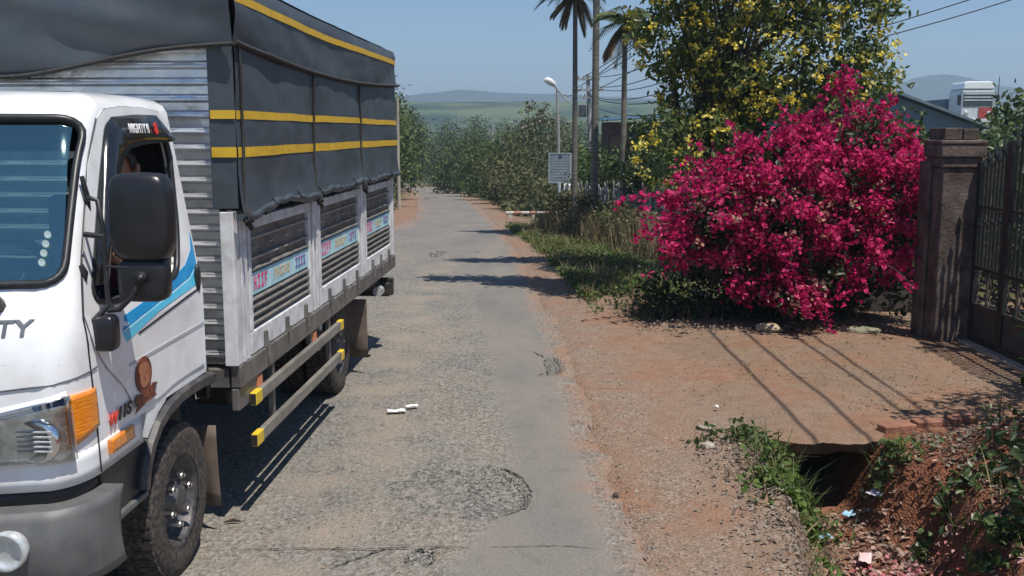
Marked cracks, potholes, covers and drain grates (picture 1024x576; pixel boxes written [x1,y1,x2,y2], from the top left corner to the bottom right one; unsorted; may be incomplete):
crack [243,545,468,569]
pothole [543,356,561,375]
pothole [383,464,536,519]
pothole [404,548,436,566]
